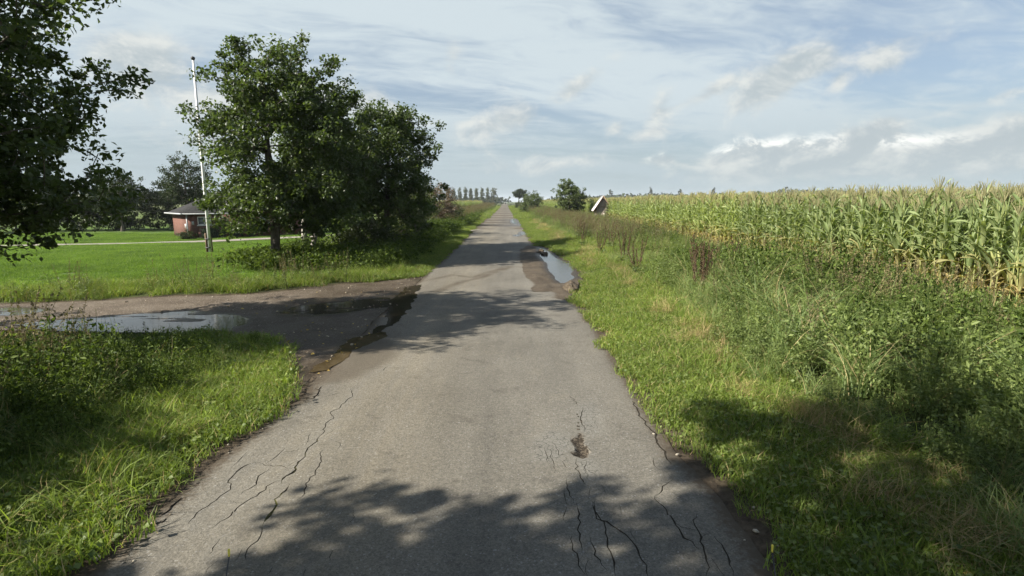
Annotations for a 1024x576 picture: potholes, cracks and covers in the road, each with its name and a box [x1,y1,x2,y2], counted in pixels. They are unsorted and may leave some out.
crack [544,401,734,576]
crack [161,386,356,571]
pothole [570,433,591,459]
